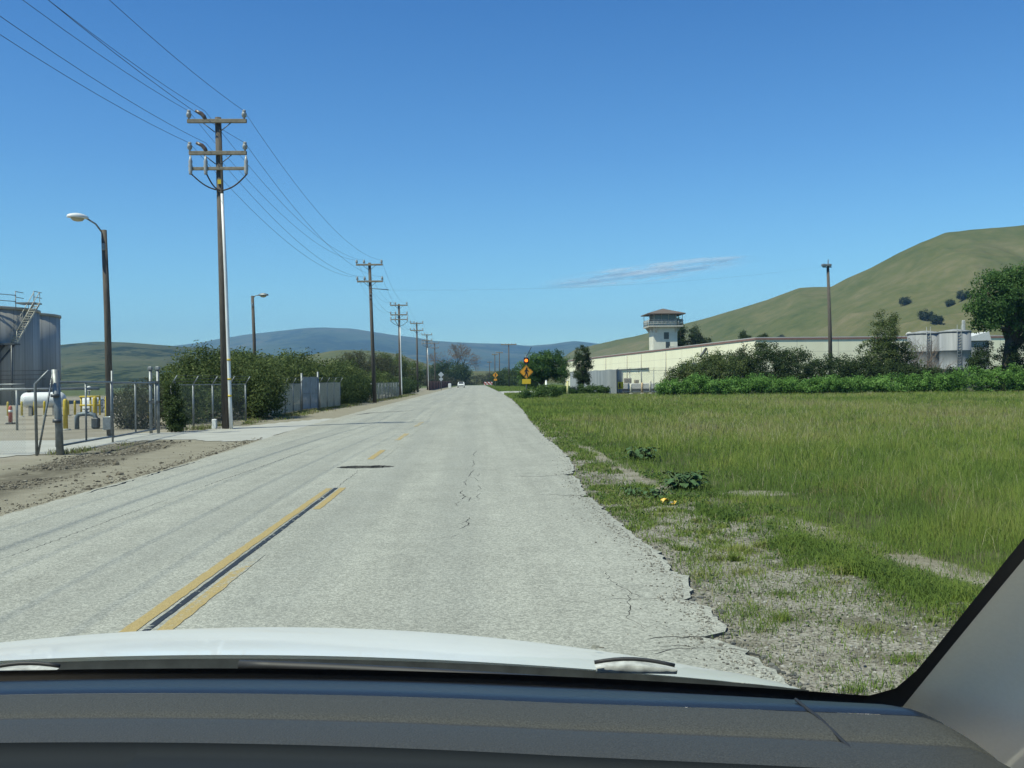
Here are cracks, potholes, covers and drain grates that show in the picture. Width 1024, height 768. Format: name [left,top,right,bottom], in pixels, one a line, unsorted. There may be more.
crack [605,573,760,657]
